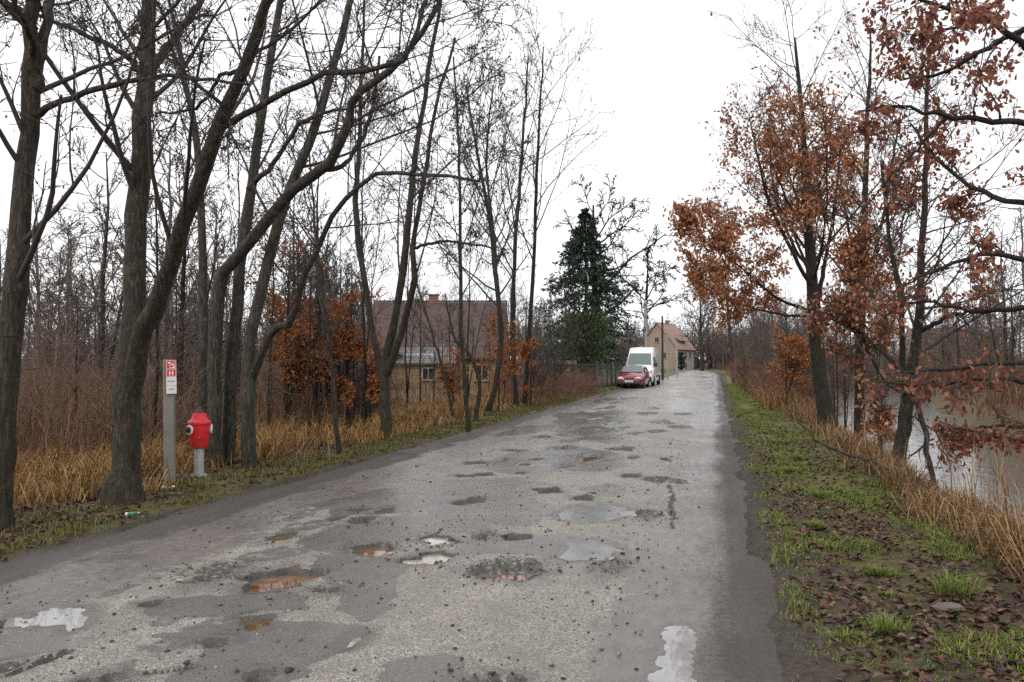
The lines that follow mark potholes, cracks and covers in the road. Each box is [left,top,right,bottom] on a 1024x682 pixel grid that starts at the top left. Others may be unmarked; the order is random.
pothole [236,565,331,594]
pothole [349,542,396,557]
crack [666,486,677,529]
pothole [464,558,550,582]
pothole [532,486,563,494]
pothole [393,550,456,564]
pothole [265,531,298,541]
pothole [448,496,487,505]
pothole [418,534,461,546]
pothole [238,613,278,631]
pothole [571,453,607,462]
pothole [639,476,692,485]
